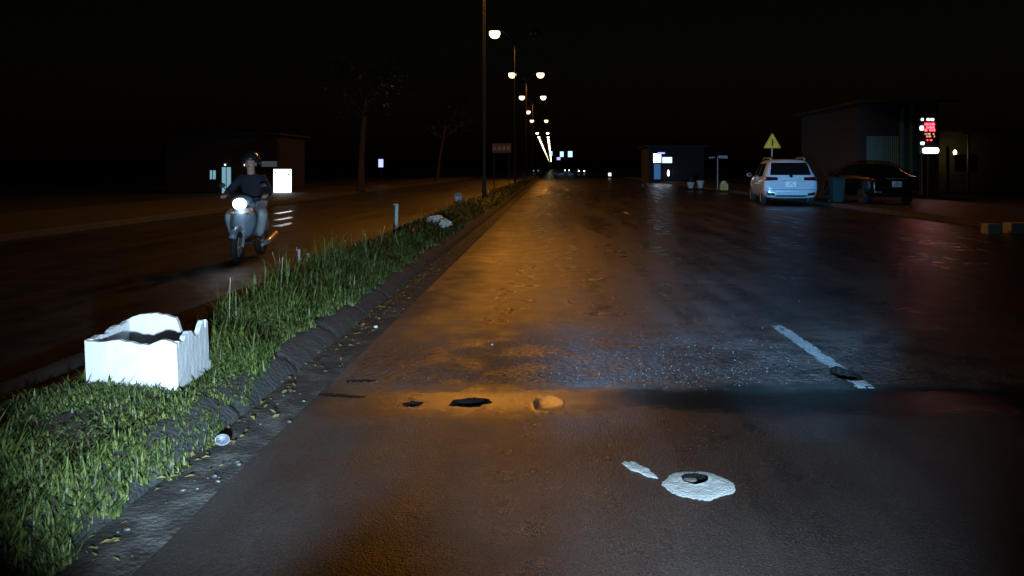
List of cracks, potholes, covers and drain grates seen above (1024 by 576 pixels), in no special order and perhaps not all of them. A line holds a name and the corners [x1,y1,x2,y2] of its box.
pothole [530,395,565,412]
pothole [829,367,864,381]
pothole [449,397,493,407]
